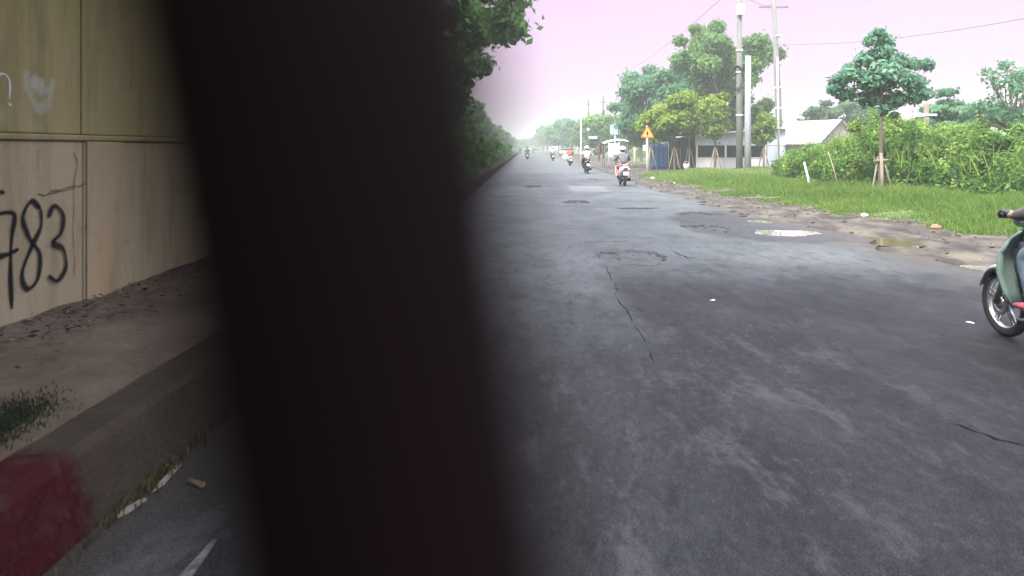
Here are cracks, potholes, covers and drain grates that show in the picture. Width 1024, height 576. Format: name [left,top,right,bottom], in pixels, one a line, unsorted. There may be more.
crack [948,423,1024,447]
pothole [679,225,731,233]
pothole [595,250,667,264]
